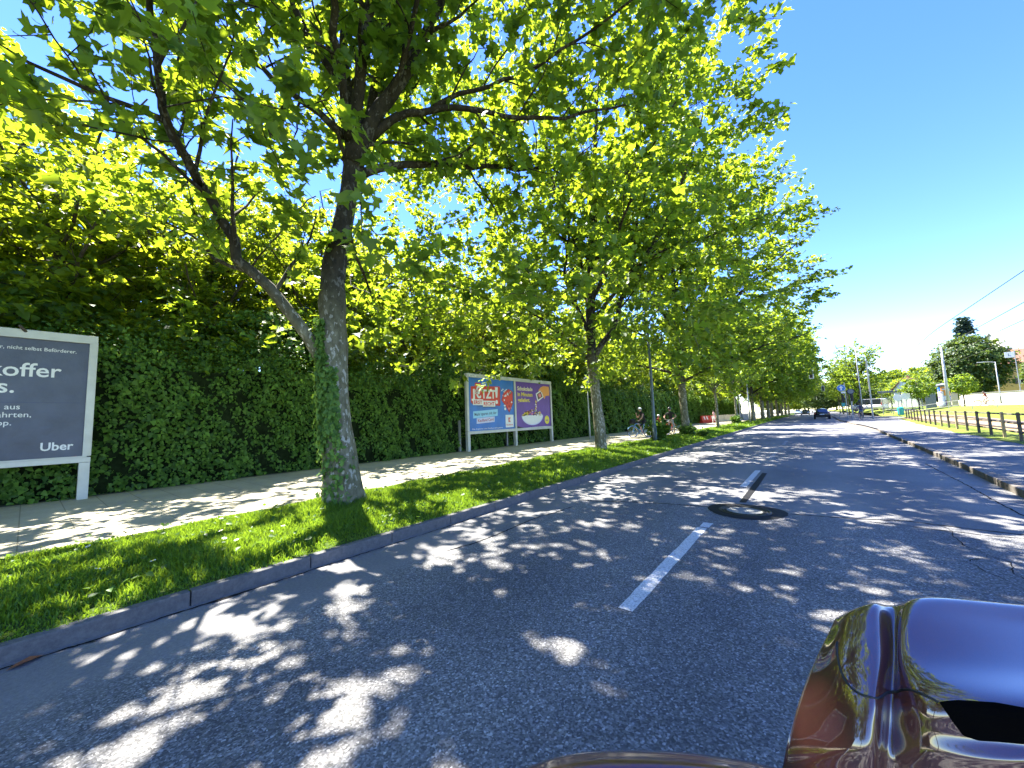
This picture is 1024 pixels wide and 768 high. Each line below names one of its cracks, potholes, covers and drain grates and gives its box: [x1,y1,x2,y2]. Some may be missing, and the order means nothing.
manhole cover [708,503,788,520]
